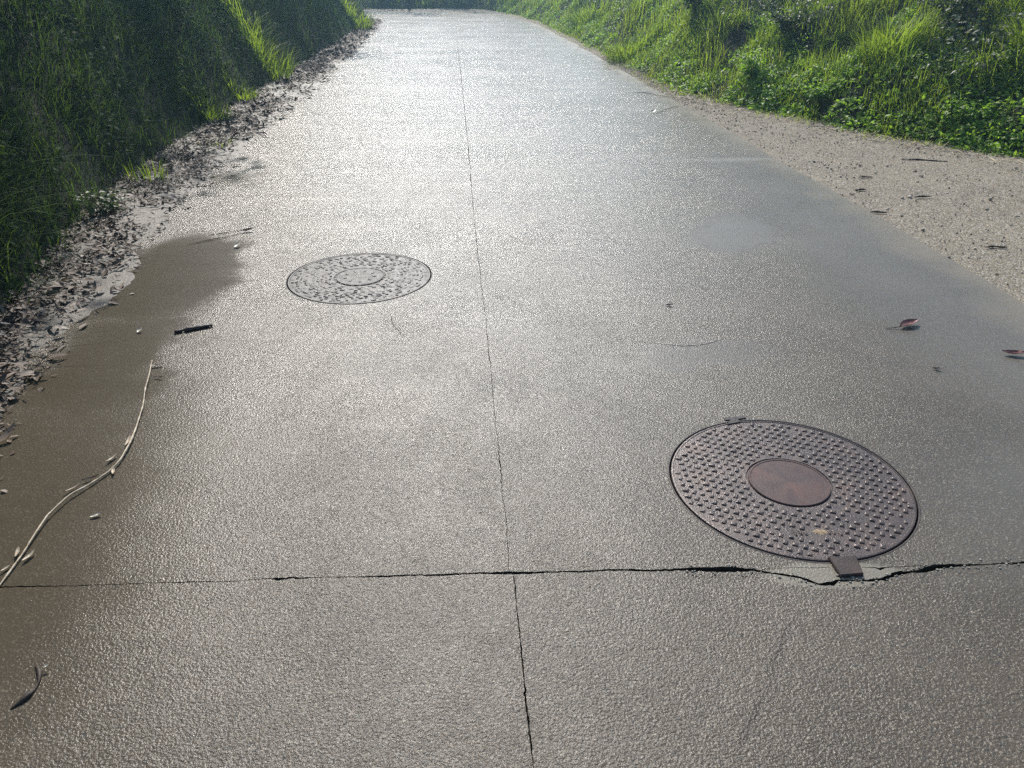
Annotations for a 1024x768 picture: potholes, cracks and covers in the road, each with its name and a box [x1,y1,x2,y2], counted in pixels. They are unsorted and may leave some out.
manhole cover [285,253,432,305]
crack [0,561,1024,588]
manhole cover [668,416,921,578]
